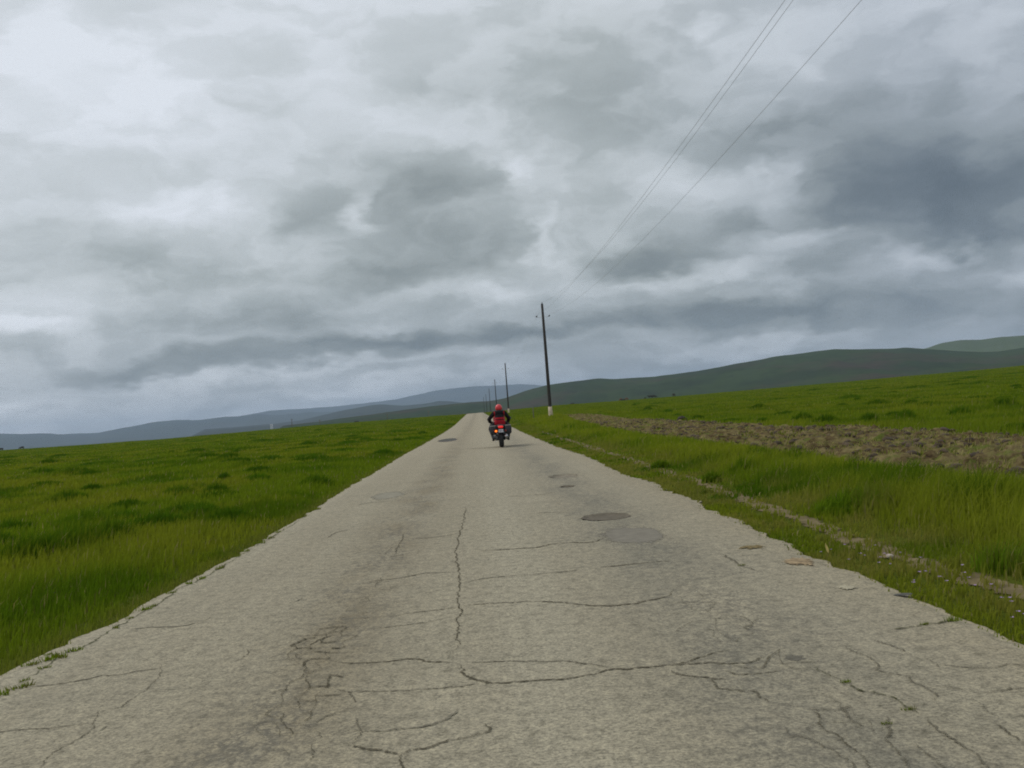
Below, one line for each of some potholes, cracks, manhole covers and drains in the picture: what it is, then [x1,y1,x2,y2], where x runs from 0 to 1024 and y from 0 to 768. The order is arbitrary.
crack [220,508,1023,768]
